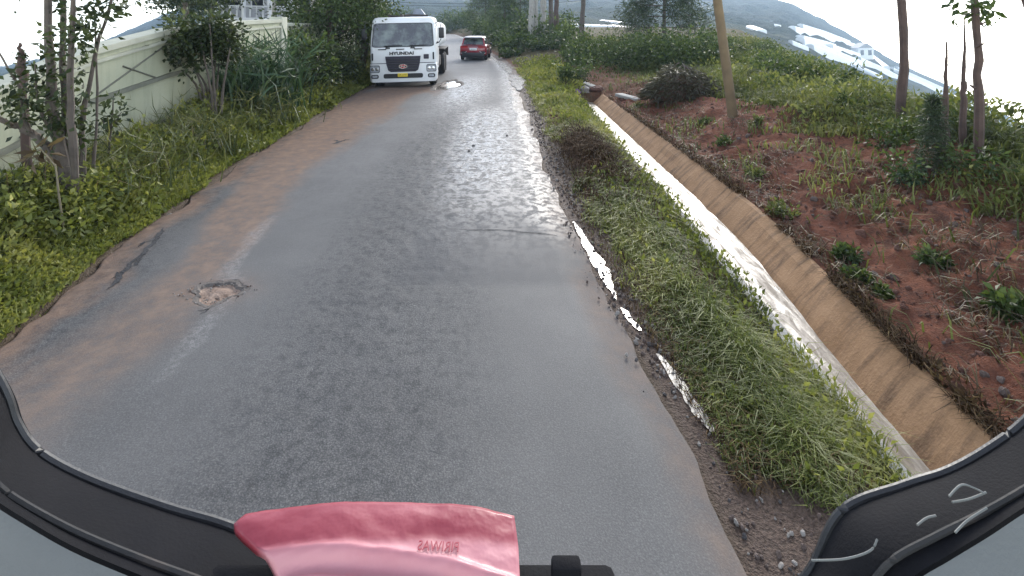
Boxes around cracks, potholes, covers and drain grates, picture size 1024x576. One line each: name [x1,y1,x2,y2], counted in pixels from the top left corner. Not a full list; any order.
pothole [430,79,464,91]
crack [106,228,164,290]
pothole [191,280,249,308]
